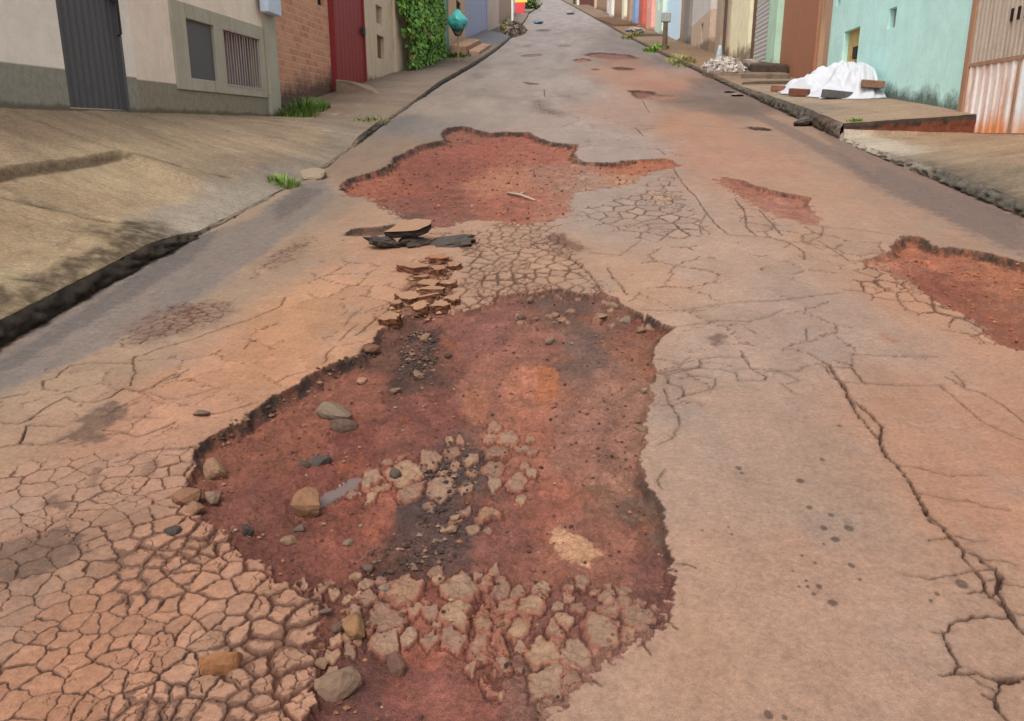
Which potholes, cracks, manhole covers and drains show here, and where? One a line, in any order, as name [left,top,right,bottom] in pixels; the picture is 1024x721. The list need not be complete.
pothole [627,90,685,101]
pothole [339,126,682,229]
crack [429,68,1024,721]
pothole [583,52,640,60]
pothole [712,176,824,226]
crack [0,237,418,721]
pothole [184,288,678,721]
pothole [858,235,1024,351]
